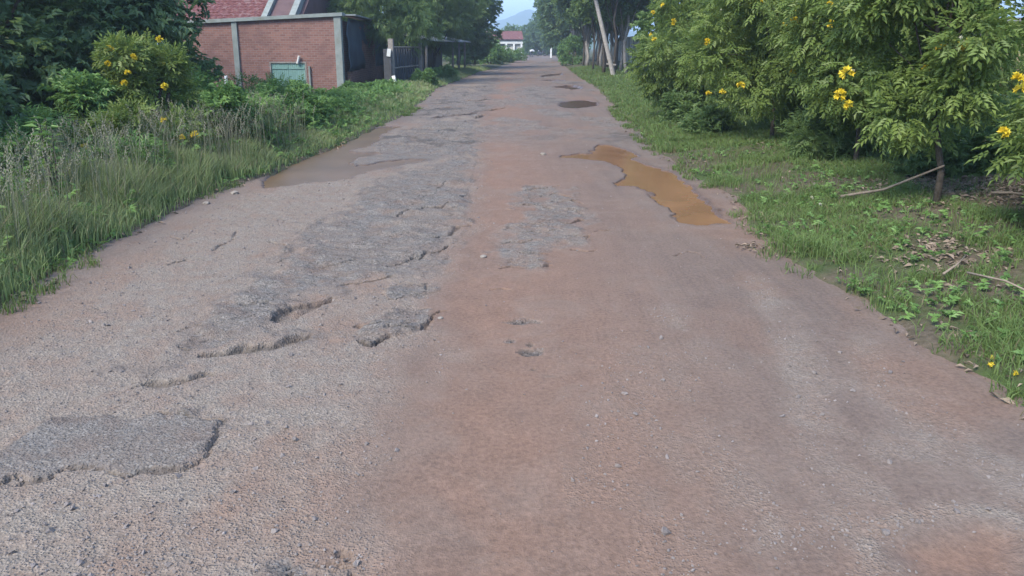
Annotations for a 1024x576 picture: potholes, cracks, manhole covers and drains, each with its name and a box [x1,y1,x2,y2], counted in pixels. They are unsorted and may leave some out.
pothole [259,294,340,324]
crack [266,180,473,348]
pothole [510,346,553,360]
pothole [558,144,736,226]
pothole [556,100,600,108]
pothole [258,126,434,189]
pothole [497,314,548,327]
